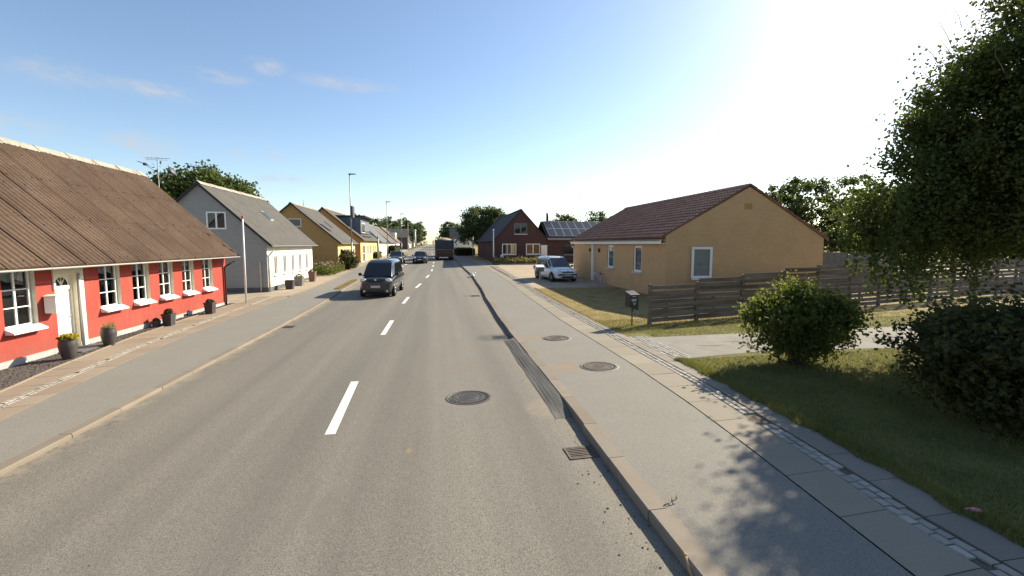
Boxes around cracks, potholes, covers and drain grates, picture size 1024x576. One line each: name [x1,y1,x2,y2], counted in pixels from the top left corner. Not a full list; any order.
drain grate [563,445,599,460]
manhole cover [580,362,620,372]
manhole cover [446,390,491,405]
